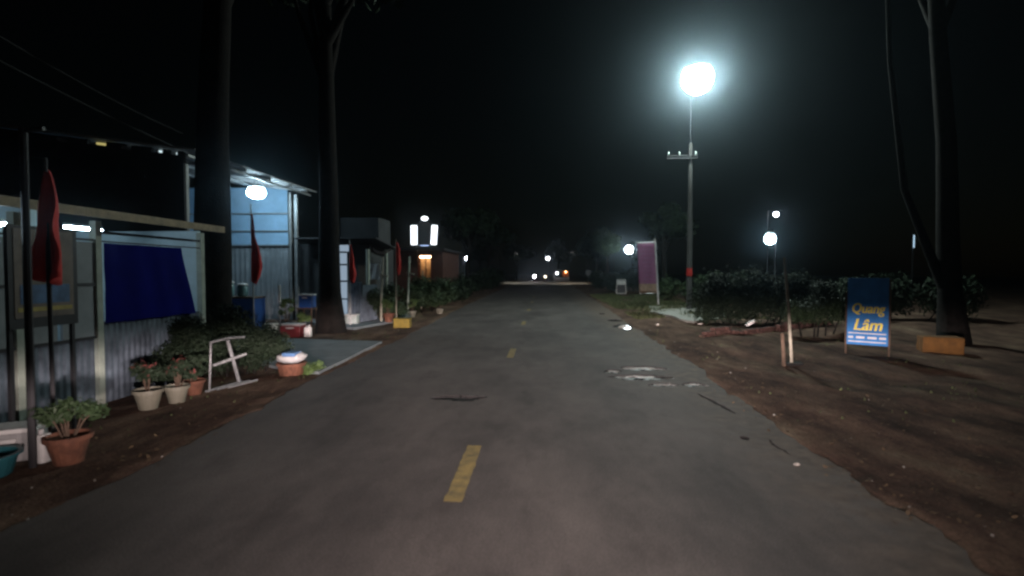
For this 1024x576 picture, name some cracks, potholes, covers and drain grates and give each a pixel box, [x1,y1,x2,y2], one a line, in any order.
crack [698,394,736,414]
